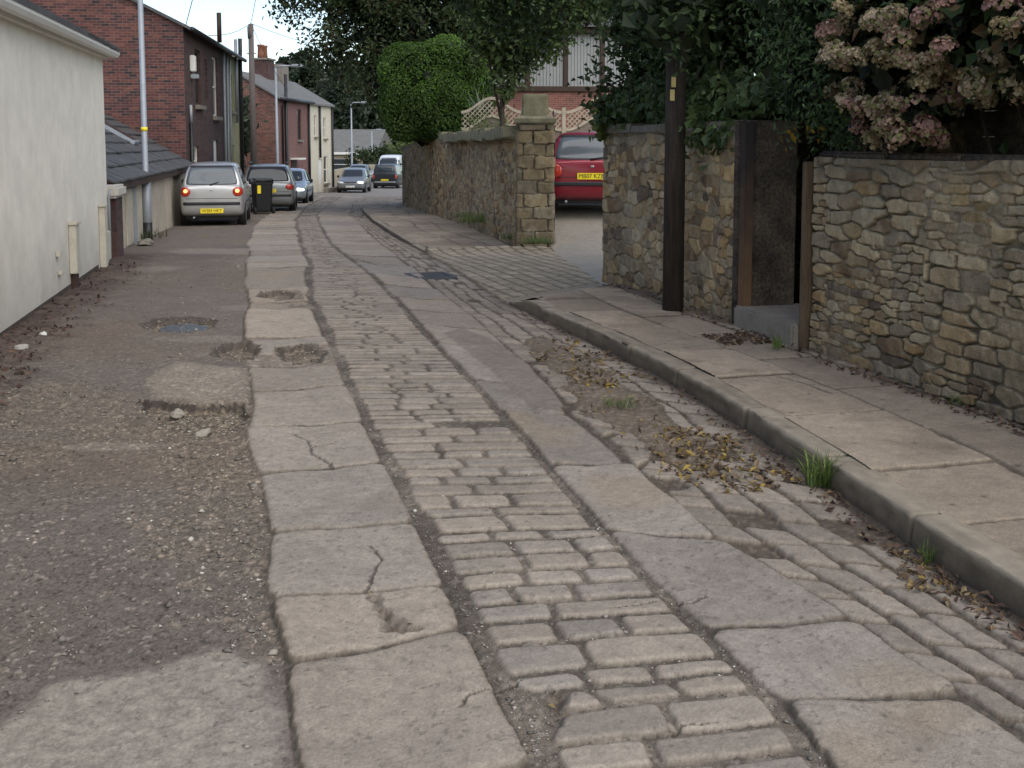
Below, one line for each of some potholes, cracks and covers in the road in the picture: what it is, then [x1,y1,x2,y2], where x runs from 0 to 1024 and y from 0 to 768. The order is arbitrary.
crack [458,679,523,708]
pothole [275,343,329,365]
pothole [254,289,297,300]
pothole [208,339,262,362]
crack [362,544,385,594]
crack [291,433,337,470]
